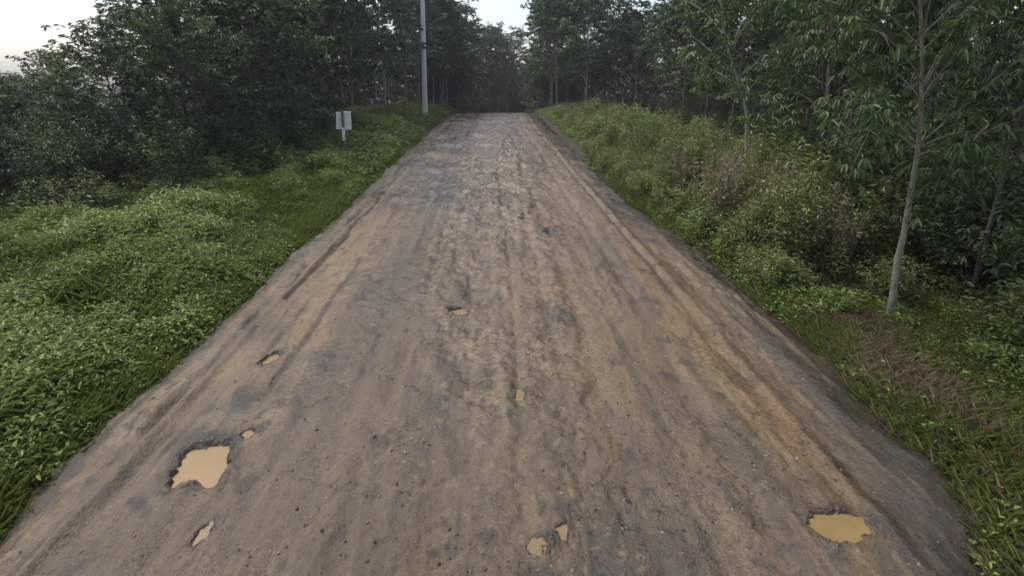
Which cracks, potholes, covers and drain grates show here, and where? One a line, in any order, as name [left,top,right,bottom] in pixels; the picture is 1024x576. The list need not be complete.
pothole [155,433,244,501]
pothole [230,421,264,444]
pothole [440,306,475,317]
pothole [509,382,532,410]
pothole [516,527,561,569]
pothole [790,501,887,554]
pothole [546,510,577,554]
pothole [248,347,288,373]
pothole [167,500,232,571]
